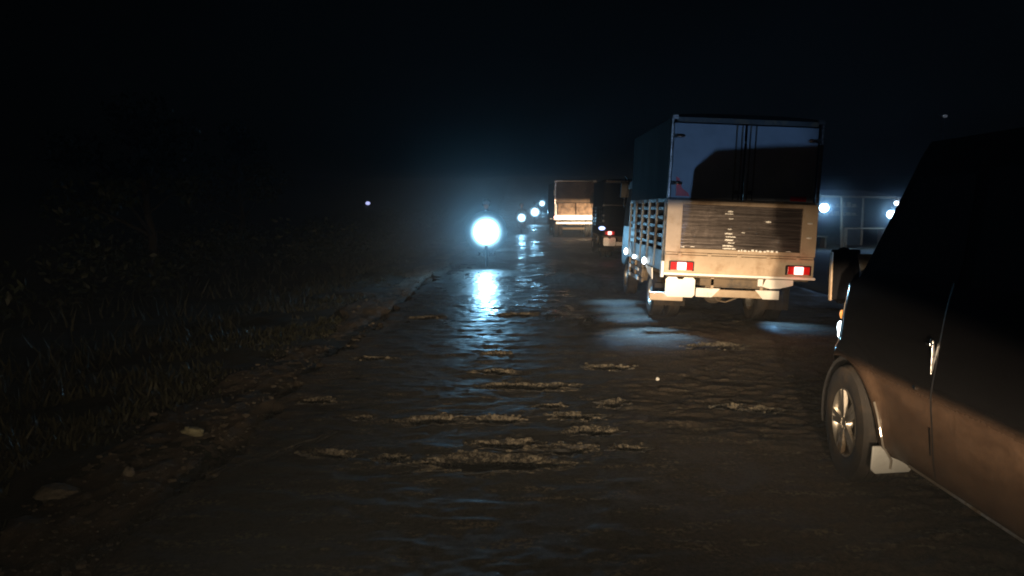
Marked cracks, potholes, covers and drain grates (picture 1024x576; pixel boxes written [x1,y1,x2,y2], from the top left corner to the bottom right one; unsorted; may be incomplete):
pothole [705,402,747,412]
pothole [451,413,530,426]
pothole [388,412,478,428]
pothole [522,441,601,458]
pothole [462,437,587,453]
pothole [561,425,630,437]
pothole [604,441,655,453]
pothole [293,395,339,406]
pothole [386,449,591,475]
pothole [543,410,612,422]
pothole [677,341,752,351]
